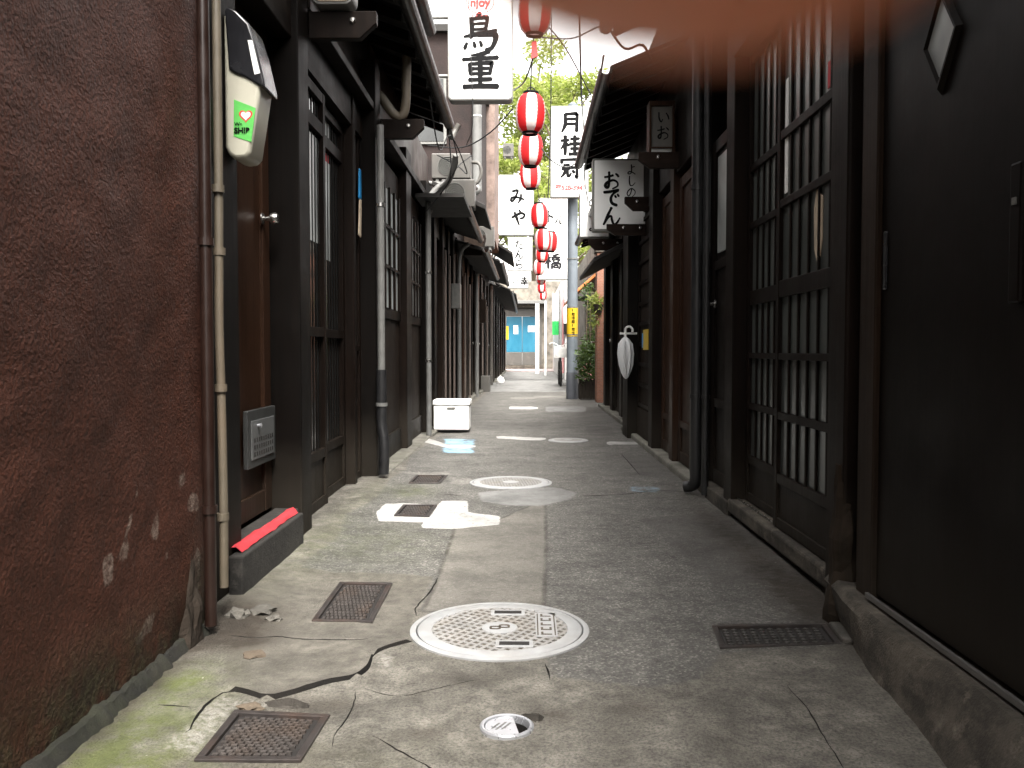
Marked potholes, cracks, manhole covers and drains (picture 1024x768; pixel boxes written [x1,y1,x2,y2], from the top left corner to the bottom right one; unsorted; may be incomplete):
crack [788,687,844,768]
manhole cover [410,602,589,662]
drain grate [312,581,392,623]
manhole cover [470,476,552,490]
drain grate [194,709,330,763]
drain grate [409,475,448,484]
drain grate [394,504,437,517]
crack [163,635,479,768]
drain grate [711,623,842,649]
crack [414,578,438,616]
